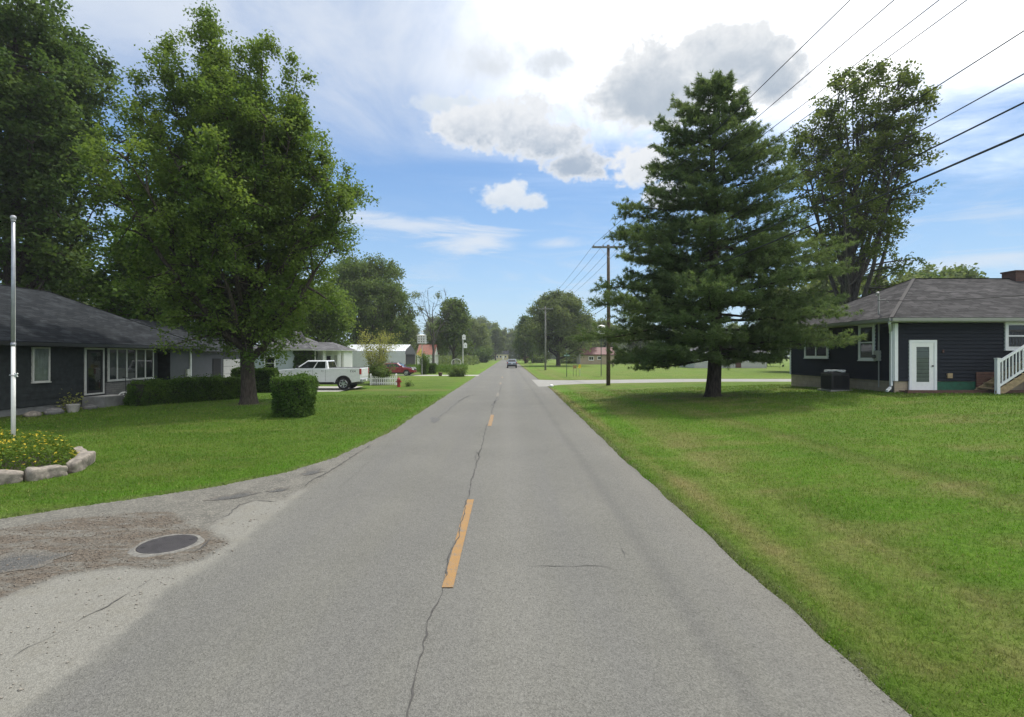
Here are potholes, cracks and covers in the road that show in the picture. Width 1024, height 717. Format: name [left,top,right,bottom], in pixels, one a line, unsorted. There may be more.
crack [406,388,501,717]
manhole cover [127,534,205,557]
